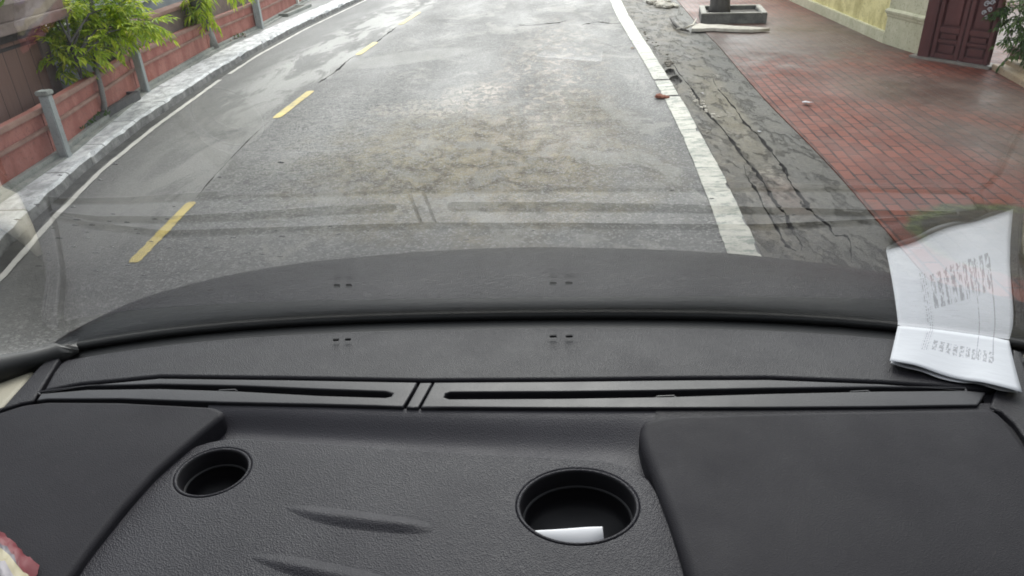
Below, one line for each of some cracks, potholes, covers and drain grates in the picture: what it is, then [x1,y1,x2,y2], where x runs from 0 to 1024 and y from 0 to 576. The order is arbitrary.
crack [195,131,258,199]
crack [713,80,810,207]
